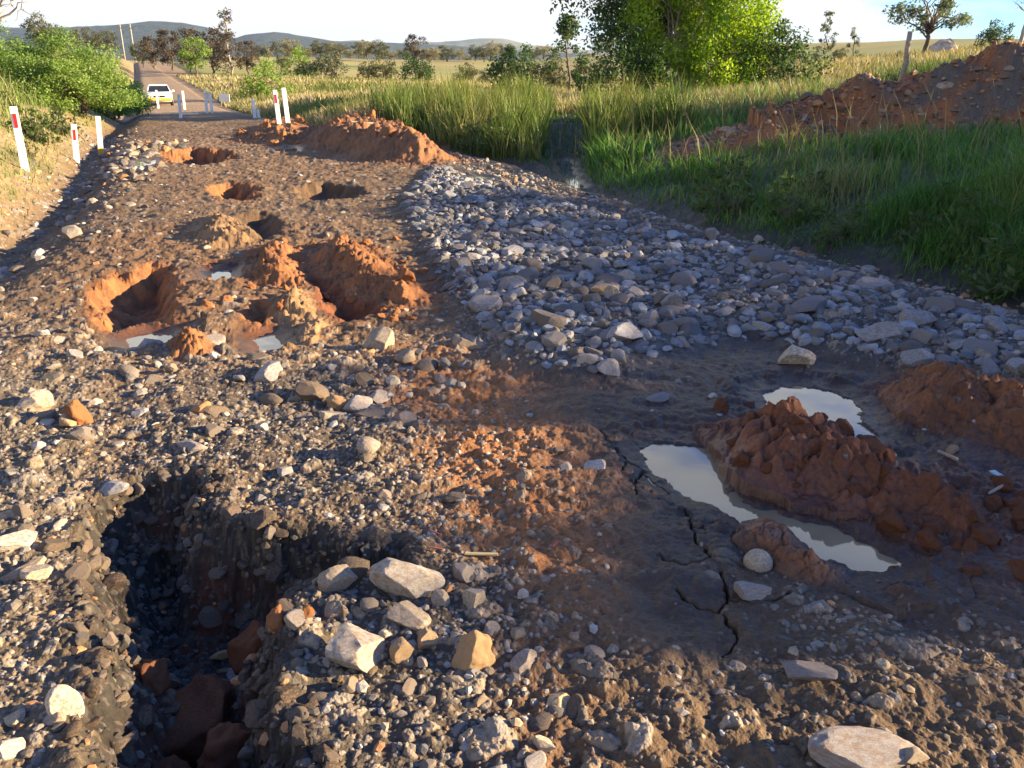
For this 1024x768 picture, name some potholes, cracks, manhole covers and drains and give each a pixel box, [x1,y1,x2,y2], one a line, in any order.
pothole [630,435,917,580]
pothole [299,264,397,326]
pothole [38,461,426,768]
pothole [281,180,374,203]
pothole [229,208,291,242]
pothole [156,146,243,166]
pothole [75,256,201,349]
crack [597,428,796,660]
pothole [203,180,272,203]
pothole [753,381,896,444]
